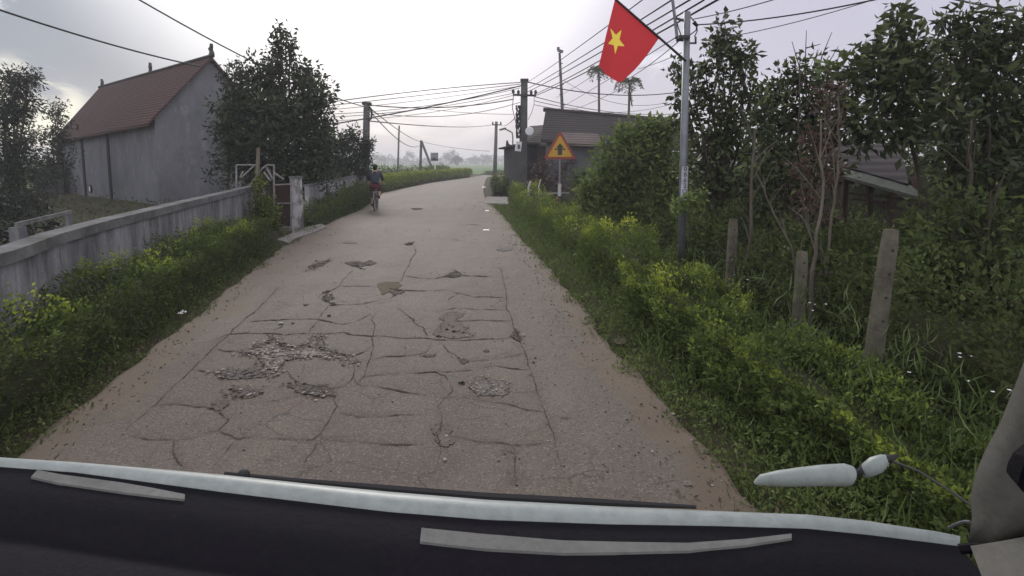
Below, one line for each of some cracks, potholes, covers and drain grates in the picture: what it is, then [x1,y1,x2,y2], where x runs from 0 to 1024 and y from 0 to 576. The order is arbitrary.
pothole [206,366,276,380]
pothole [341,260,377,269]
pothole [279,380,337,397]
pothole [462,374,516,397]
crack [121,242,565,480]
pothole [221,384,266,398]
pothole [233,333,362,375]
